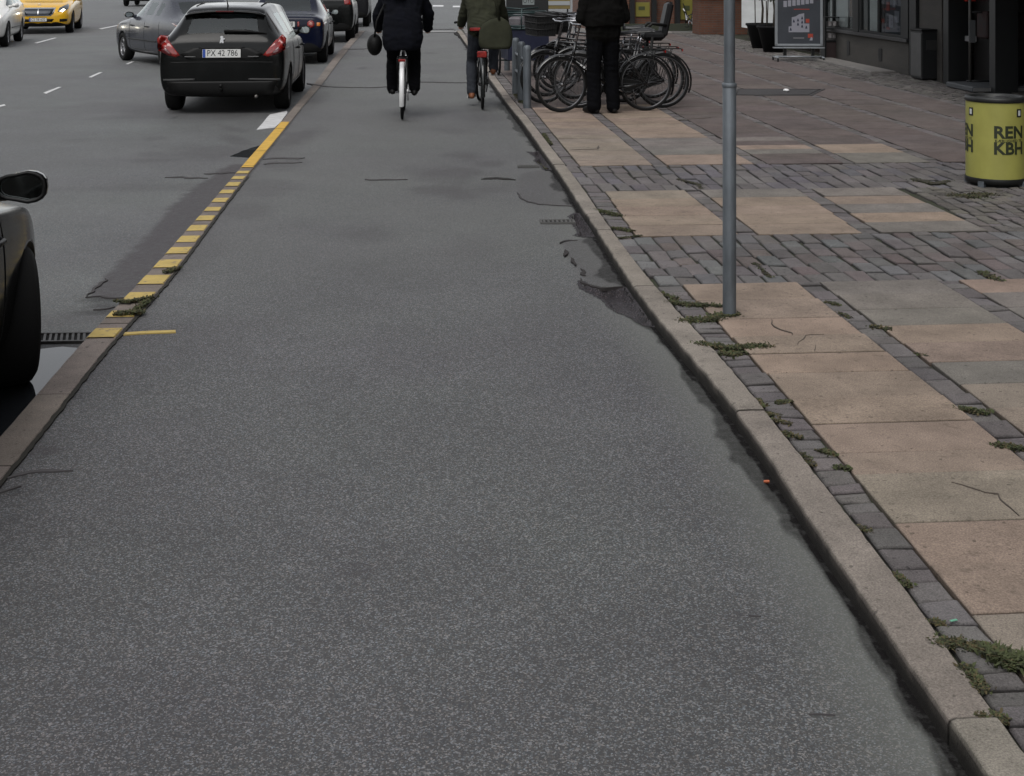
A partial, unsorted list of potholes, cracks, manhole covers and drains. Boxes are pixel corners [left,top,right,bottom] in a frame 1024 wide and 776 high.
crack [771,319,824,351]
pothole [567,213,595,237]
pothole [577,280,655,327]
crack [951,482,1019,516]
drain grate [41,332,92,344]
